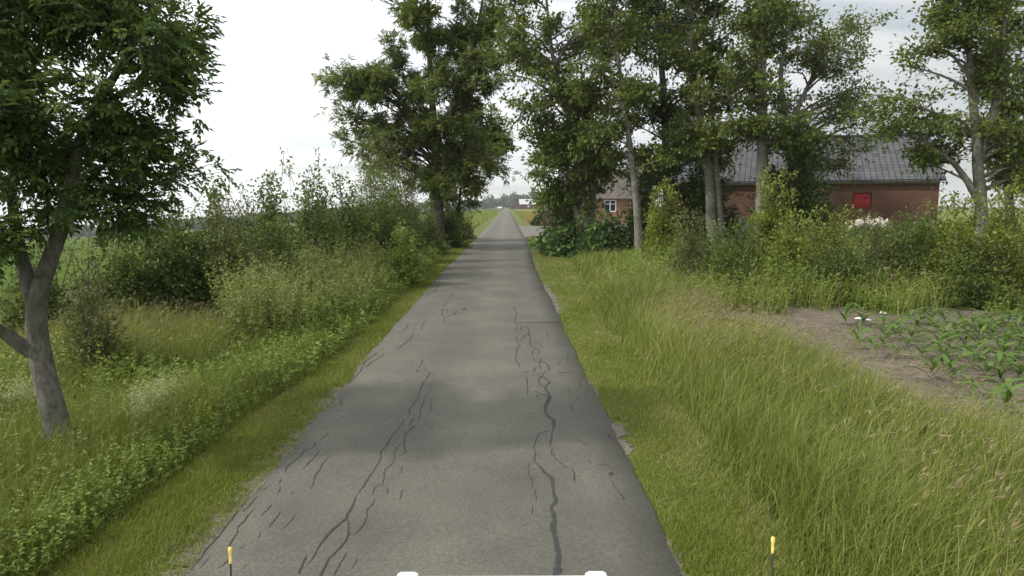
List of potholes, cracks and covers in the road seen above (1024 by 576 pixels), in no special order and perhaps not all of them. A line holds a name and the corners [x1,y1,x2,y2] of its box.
crack [190,286,457,576]
crack [513,308,624,576]
